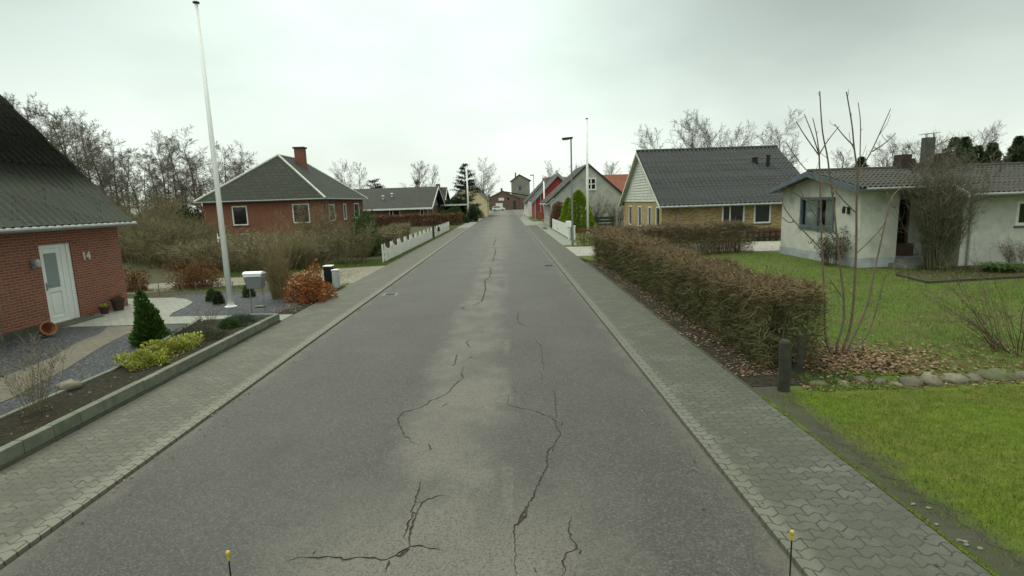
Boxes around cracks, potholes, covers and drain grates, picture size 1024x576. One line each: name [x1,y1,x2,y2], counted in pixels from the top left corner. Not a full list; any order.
crack [506,312,582,576]
crack [397,339,474,450]
crack [461,236,496,310]
crack [285,483,444,570]
